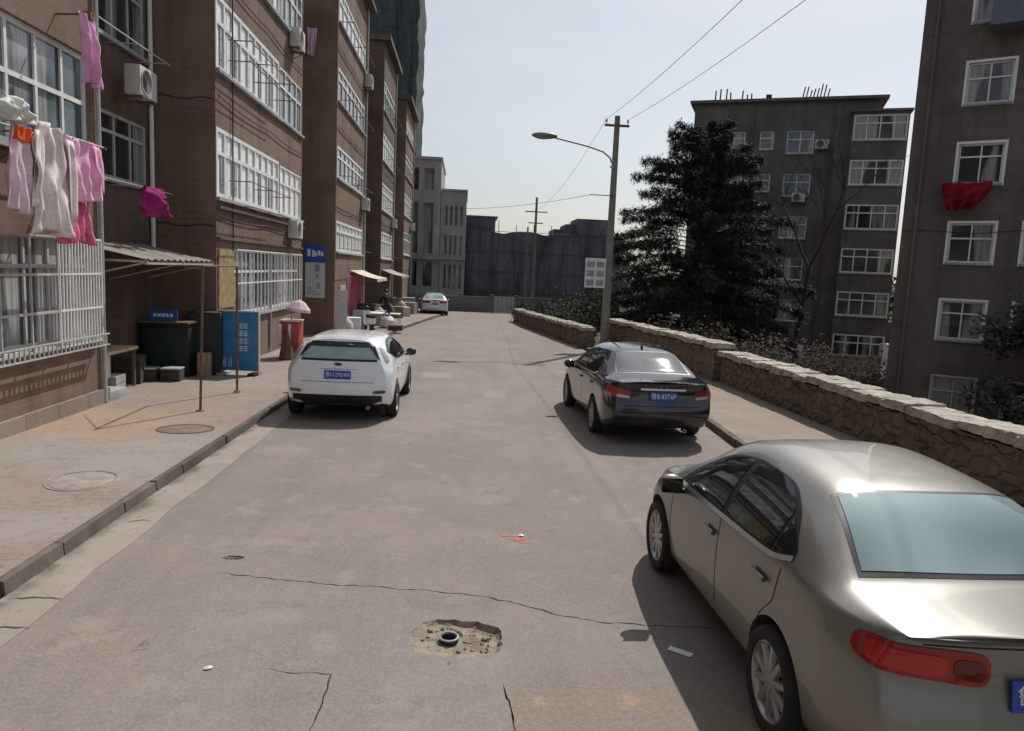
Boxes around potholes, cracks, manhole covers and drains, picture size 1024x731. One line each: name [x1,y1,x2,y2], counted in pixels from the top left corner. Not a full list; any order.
crack [503,685,515,731]
manhole cover [43,470,121,492]
manhole cover [156,424,215,434]
pothole [410,619,503,659]
crack [265,668,332,731]
crack [224,573,709,628]
